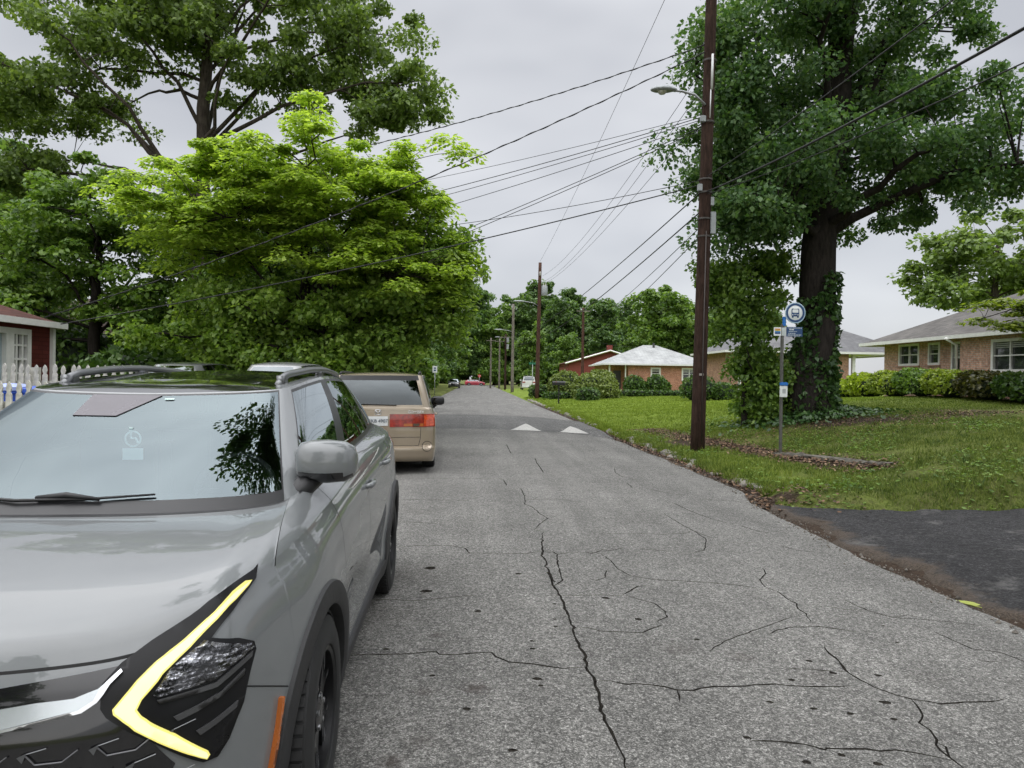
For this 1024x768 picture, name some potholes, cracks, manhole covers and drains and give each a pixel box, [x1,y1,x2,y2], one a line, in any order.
crack [359,481,1003,768]
